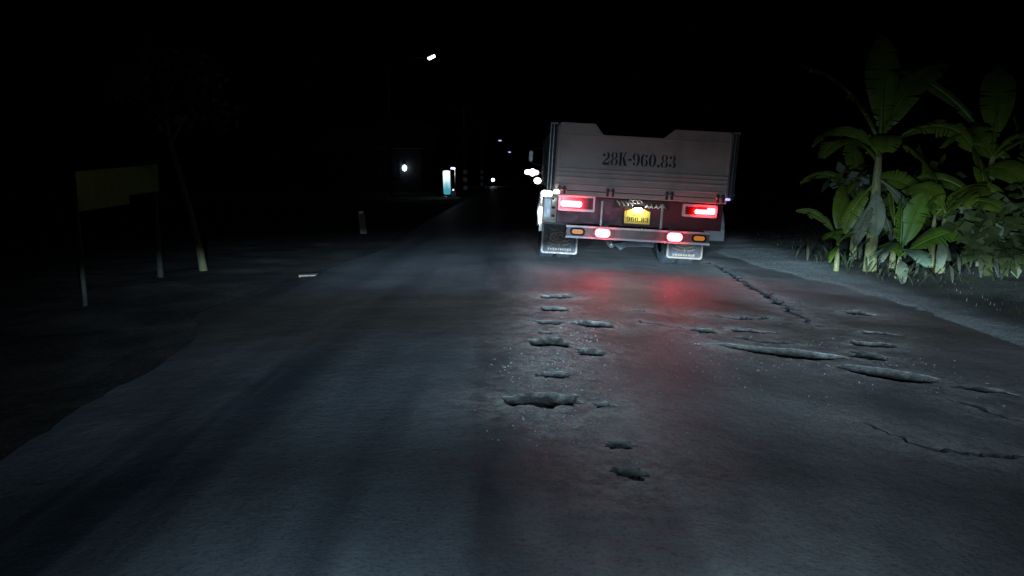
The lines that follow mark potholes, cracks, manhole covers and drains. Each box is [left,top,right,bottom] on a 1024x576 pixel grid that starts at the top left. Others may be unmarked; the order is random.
pothole [573,347,607,356]
pothole [522,337,574,348]
pothole [835,364,941,384]
pothole [712,343,850,361]
pothole [847,340,898,348]
crack [863,399,1024,460]
pothole [609,466,650,481]
crack [637,262,824,344]
pothole [564,320,615,328]
pothole [600,439,638,450]
pothole [532,371,574,379]
pothole [501,391,586,409]
